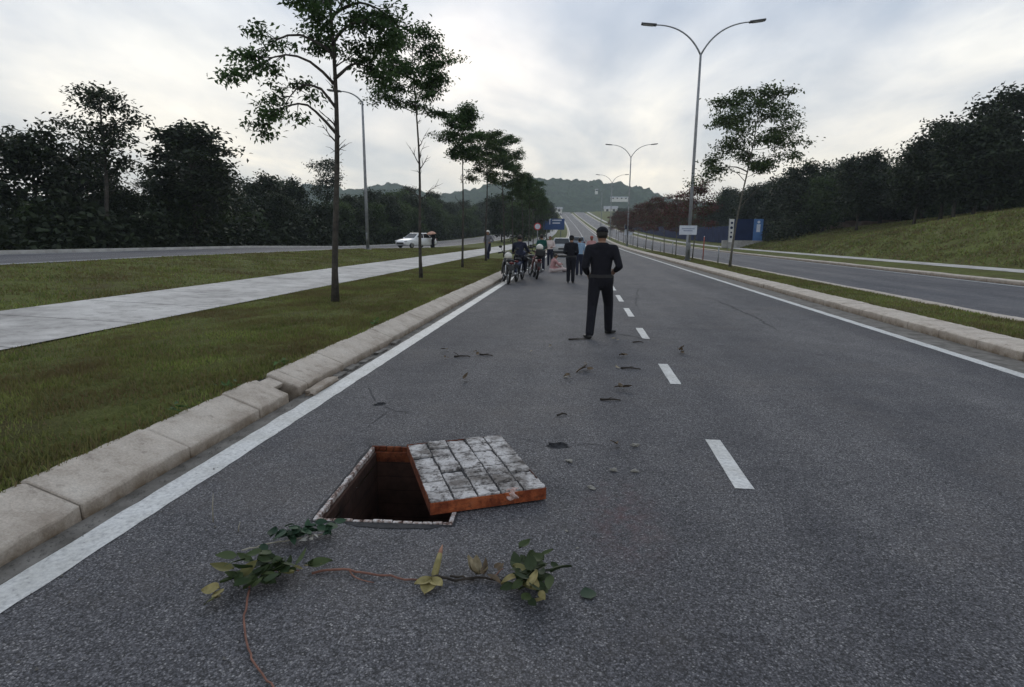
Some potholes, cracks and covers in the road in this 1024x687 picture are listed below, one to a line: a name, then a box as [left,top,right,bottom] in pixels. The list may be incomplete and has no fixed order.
manhole cover [407,435,546,515]
manhole cover [310,445,459,529]
crack [713,301,777,330]
